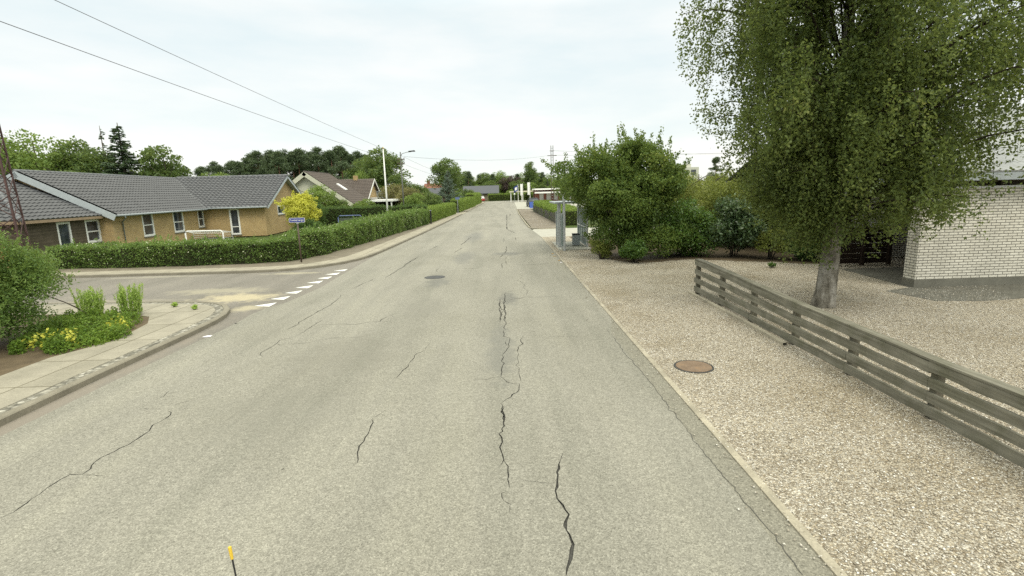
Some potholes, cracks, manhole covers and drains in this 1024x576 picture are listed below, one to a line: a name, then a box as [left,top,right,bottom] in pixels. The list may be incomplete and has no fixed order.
manhole cover [674,360,714,373]
crack [1,391,186,518]
crack [260,281,388,356]
crack [461,215,575,575]
crack [357,410,385,463]
